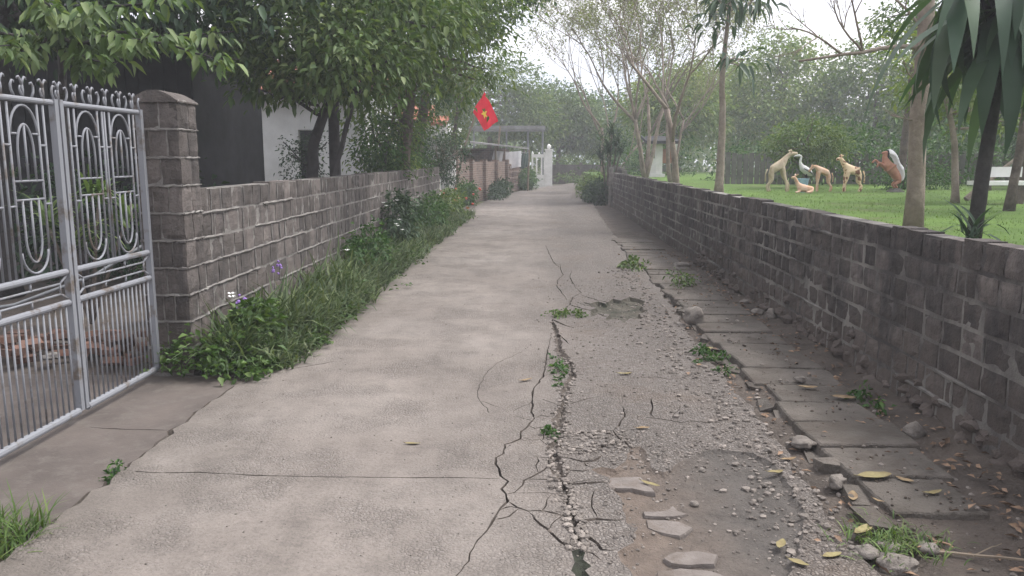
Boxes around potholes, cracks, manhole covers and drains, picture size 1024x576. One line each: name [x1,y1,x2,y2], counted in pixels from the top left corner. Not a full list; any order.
pothole [583,297,647,323]
pothole [571,549,591,576]
crack [134,245,634,576]
pothole [591,446,805,576]
